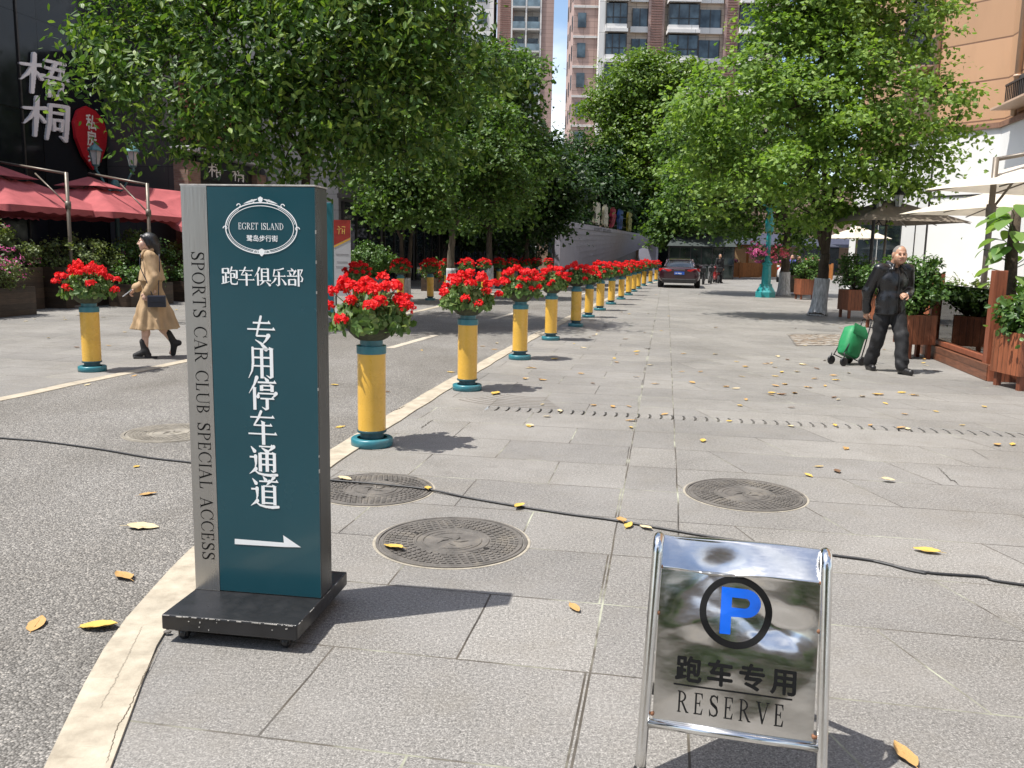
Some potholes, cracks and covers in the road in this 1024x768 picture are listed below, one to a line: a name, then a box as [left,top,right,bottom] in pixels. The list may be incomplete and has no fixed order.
manhole cover [372,517,530,570]
manhole cover [786,334,841,346]
manhole cover [683,478,809,513]
manhole cover [120,423,190,443]
manhole cover [330,473,435,507]
